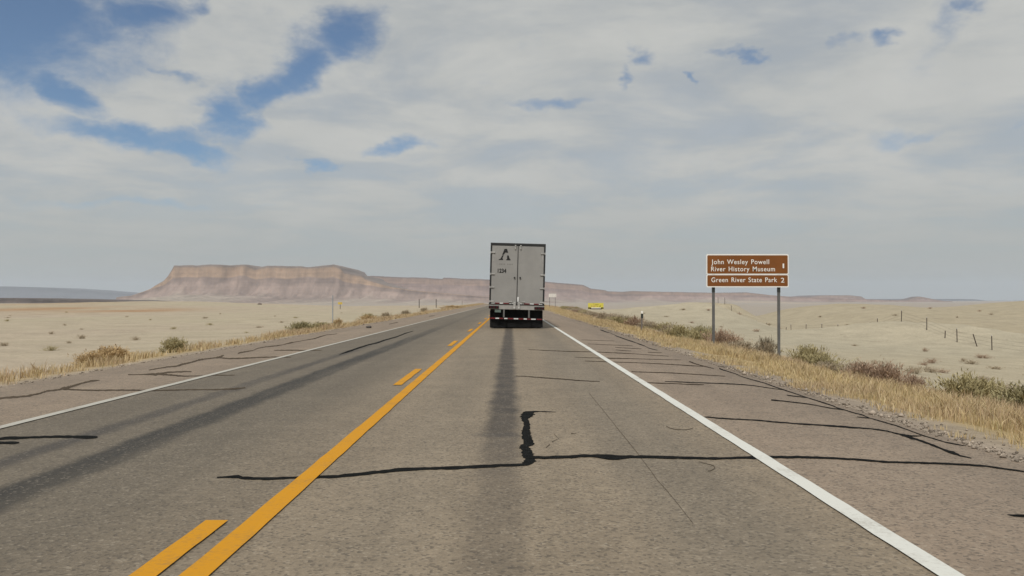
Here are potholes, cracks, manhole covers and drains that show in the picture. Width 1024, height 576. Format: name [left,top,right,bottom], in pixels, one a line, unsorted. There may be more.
crack [529,330,964,446]
crack [525,376,693,523]
crack [0,334,332,399]
